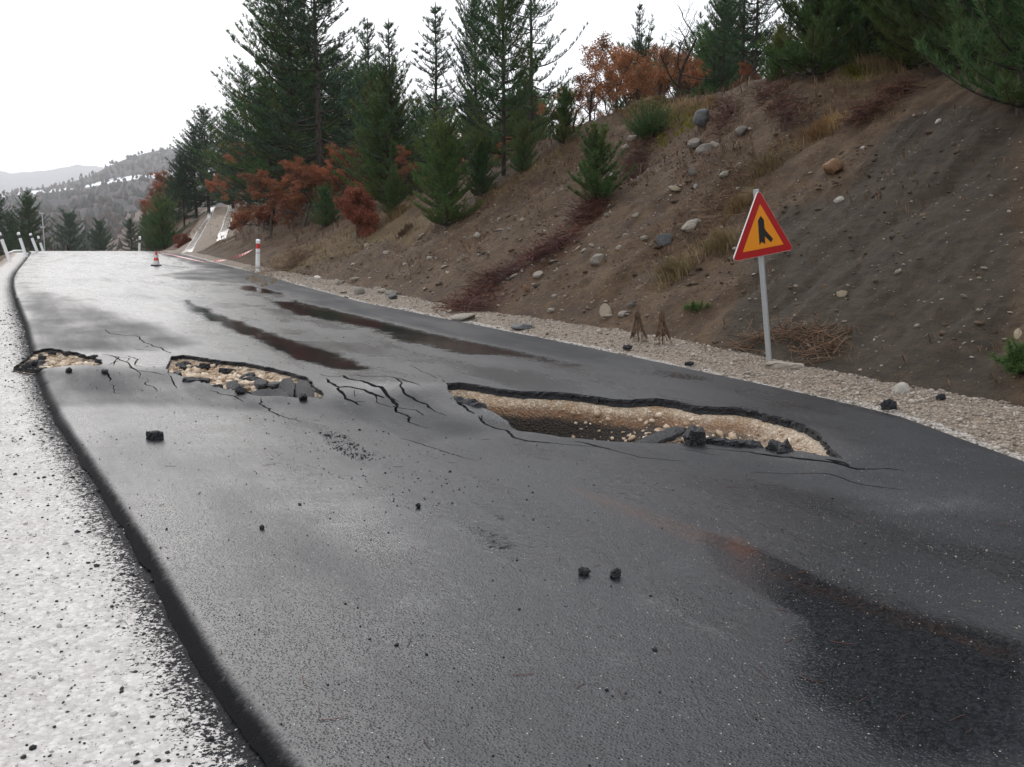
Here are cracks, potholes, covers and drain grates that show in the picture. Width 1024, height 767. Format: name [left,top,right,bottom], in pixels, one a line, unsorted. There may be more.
pothole [443,380,842,458]
crack [105,330,178,394]
pothole [11,348,103,374]
crack [321,366,901,490]
pothole [166,355,324,399]
